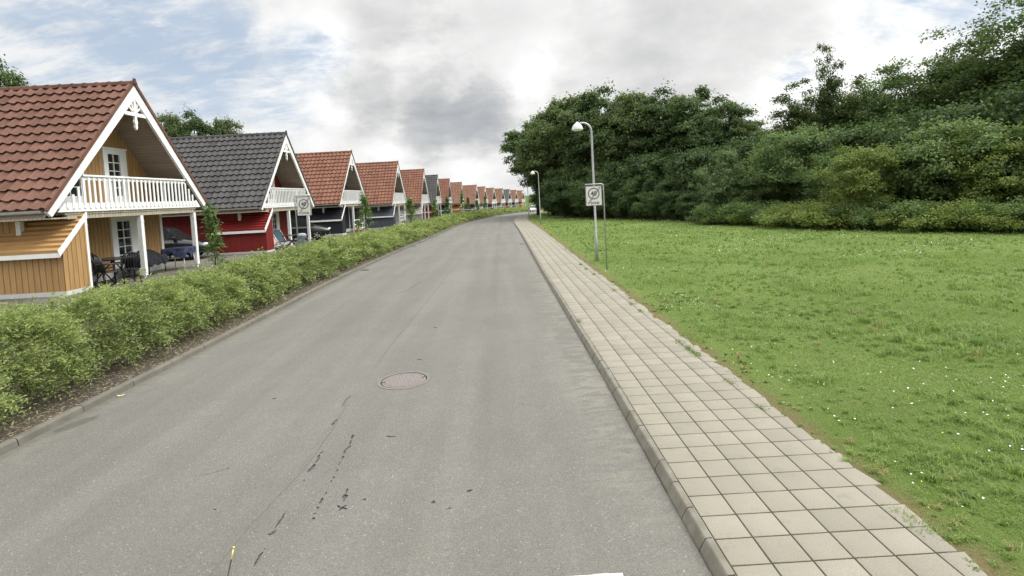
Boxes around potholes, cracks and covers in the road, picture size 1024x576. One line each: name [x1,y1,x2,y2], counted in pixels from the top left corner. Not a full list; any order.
manhole cover [377,371,431,390]
crack [254,514,284,566]
crack [303,396,354,519]
